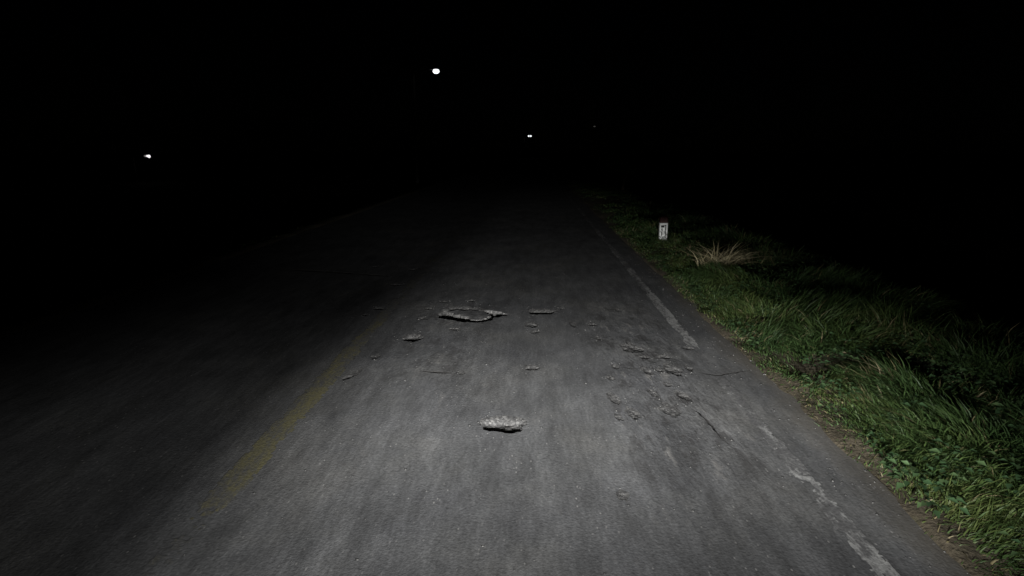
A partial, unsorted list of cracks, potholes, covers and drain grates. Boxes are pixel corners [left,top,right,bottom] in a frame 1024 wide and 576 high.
pothole [624,406,641,420]
pothole [658,401,682,418]
crack [692,409,722,439]
